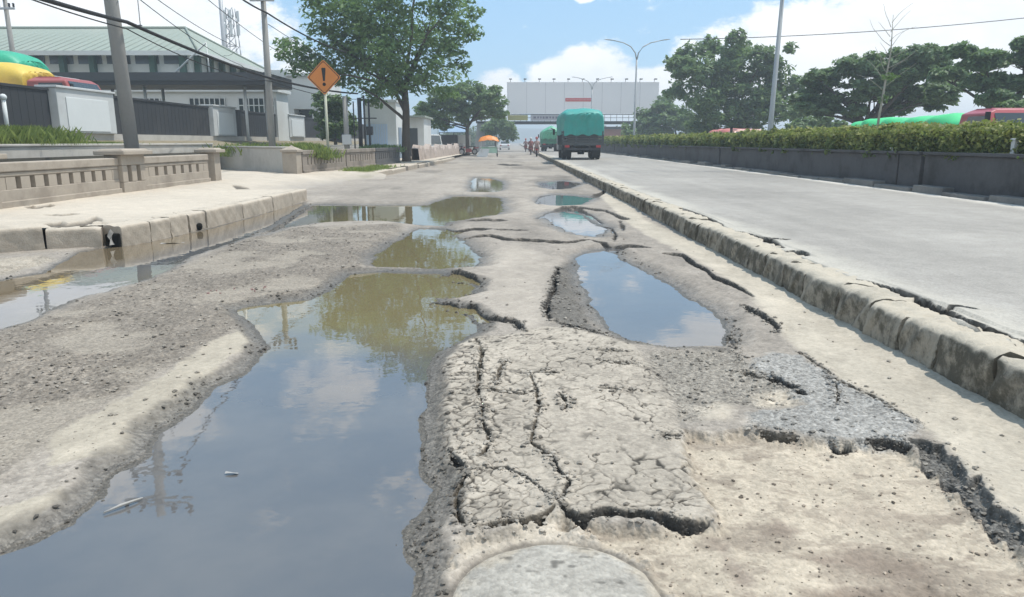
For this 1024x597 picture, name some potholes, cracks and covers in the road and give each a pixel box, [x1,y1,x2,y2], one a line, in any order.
crack [943,305,977,315]
pothole [528,179,590,189]
pothole [558,242,759,348]
crack [445,191,808,395]
pothole [522,206,634,238]
pothole [521,191,607,206]
pothole [259,193,524,237]
pothole [0,266,501,597]
manhole cover [453,545,661,597]
pothole [343,224,505,274]
crack [436,303,709,536]
